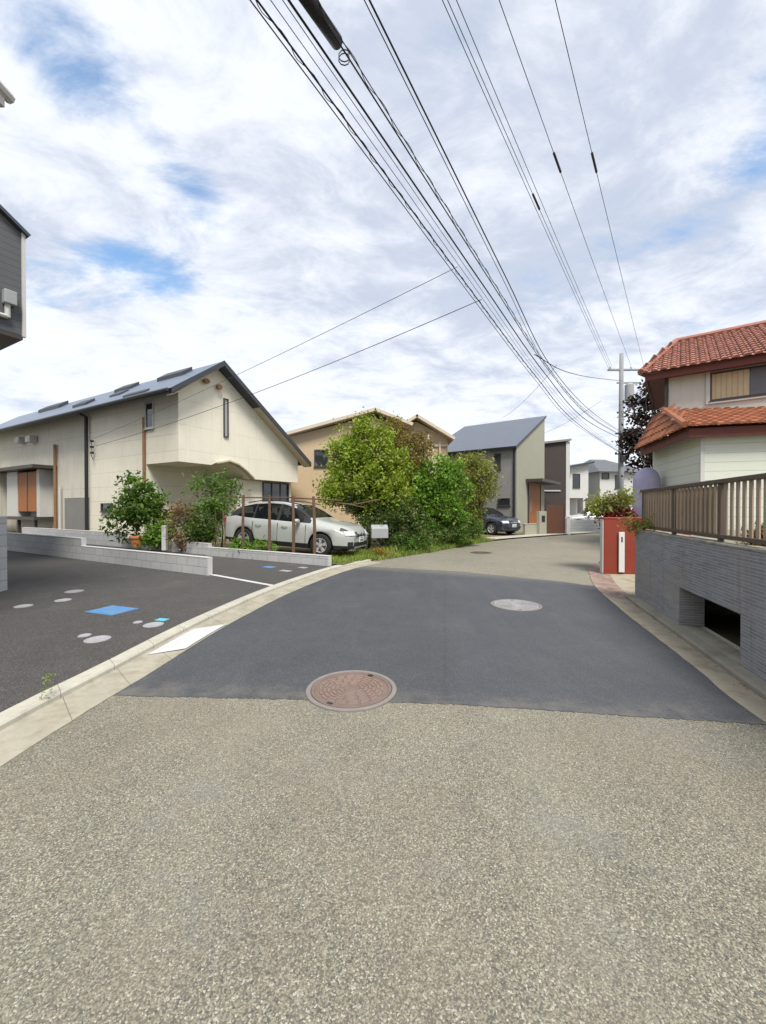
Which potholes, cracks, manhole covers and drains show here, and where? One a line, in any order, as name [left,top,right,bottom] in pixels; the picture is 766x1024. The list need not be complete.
manhole cover [491,599,542,611]
manhole cover [306,670,397,712]
